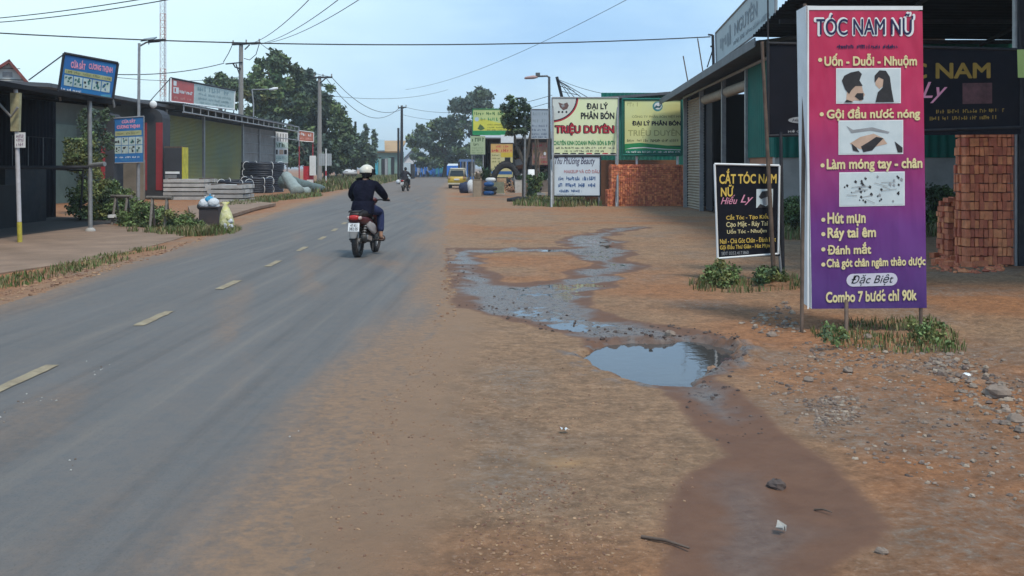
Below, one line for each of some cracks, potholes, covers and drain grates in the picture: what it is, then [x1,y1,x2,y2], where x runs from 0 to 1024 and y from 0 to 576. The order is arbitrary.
pothole [584,341,736,387]
